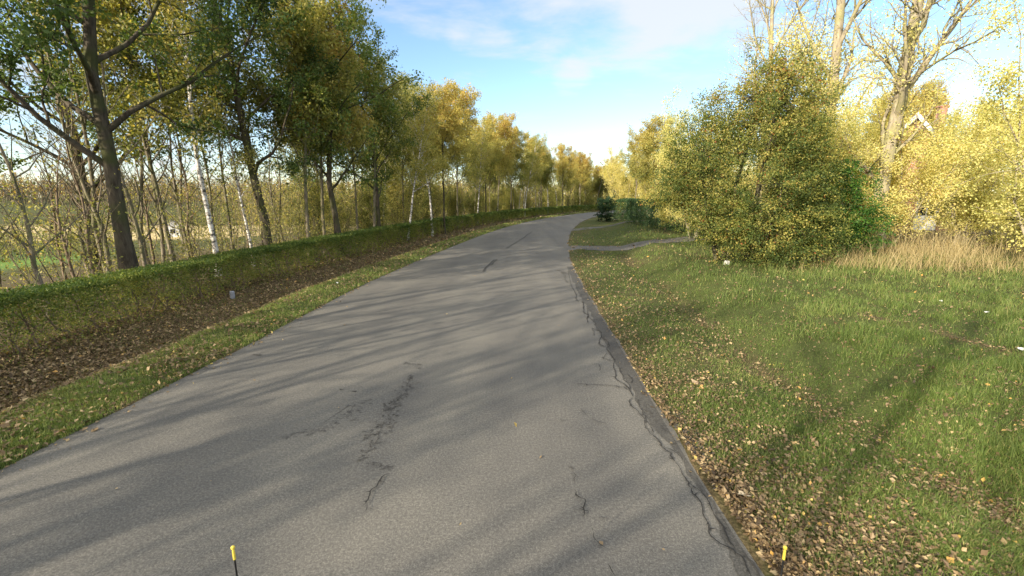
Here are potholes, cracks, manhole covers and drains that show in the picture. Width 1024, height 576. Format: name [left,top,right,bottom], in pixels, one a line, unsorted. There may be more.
crack [561,272,760,576]
crack [363,474,386,513]
